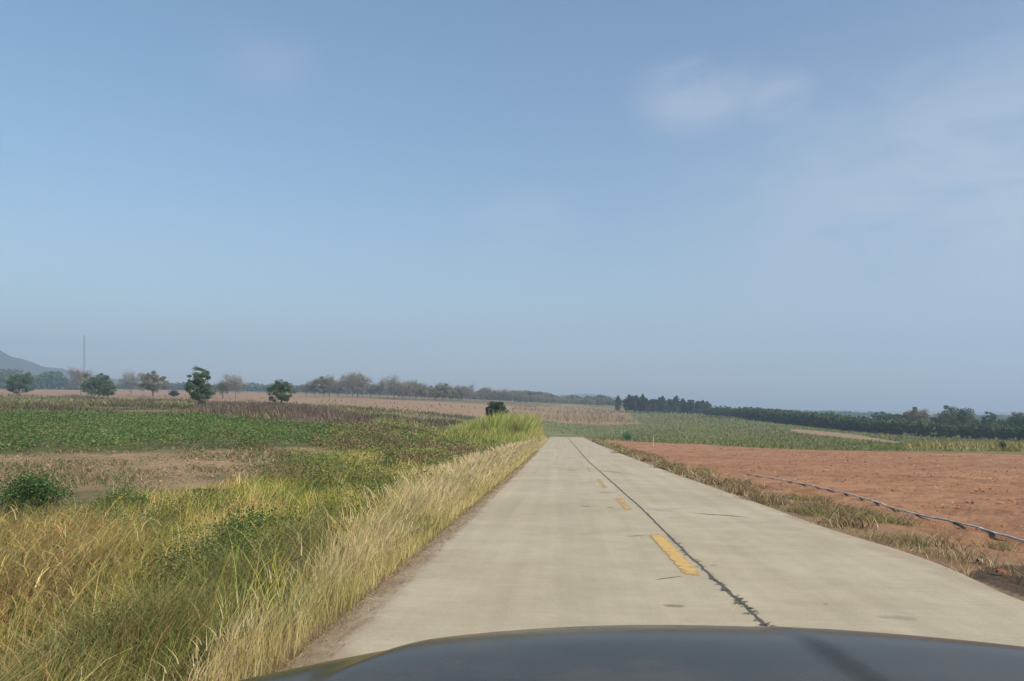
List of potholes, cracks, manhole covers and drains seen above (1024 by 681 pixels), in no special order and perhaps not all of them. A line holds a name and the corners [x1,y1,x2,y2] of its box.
crack [569,439,795,626]
